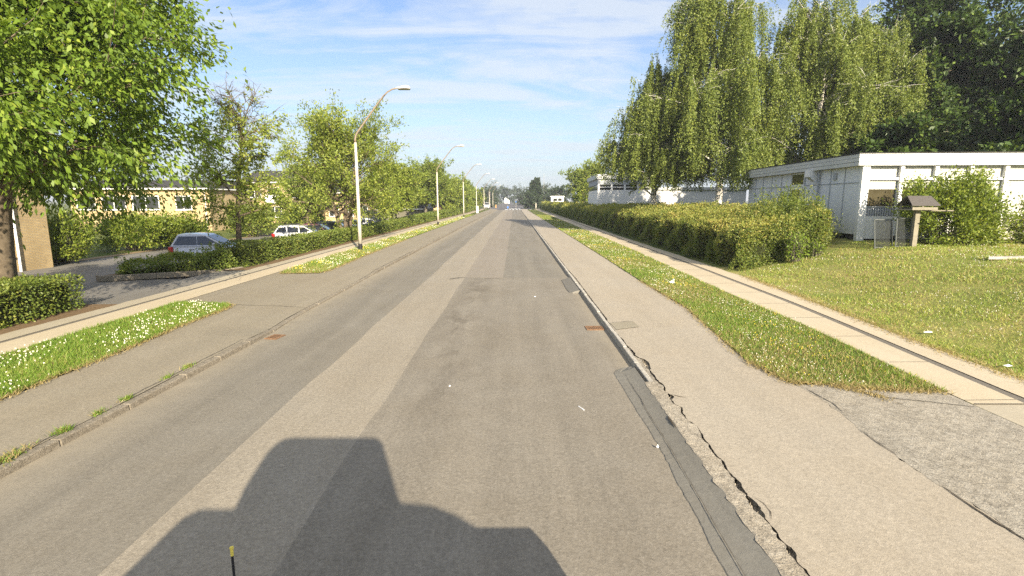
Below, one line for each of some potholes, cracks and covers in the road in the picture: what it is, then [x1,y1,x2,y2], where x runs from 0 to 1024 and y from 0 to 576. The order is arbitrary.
crack [759,500,810,576]
